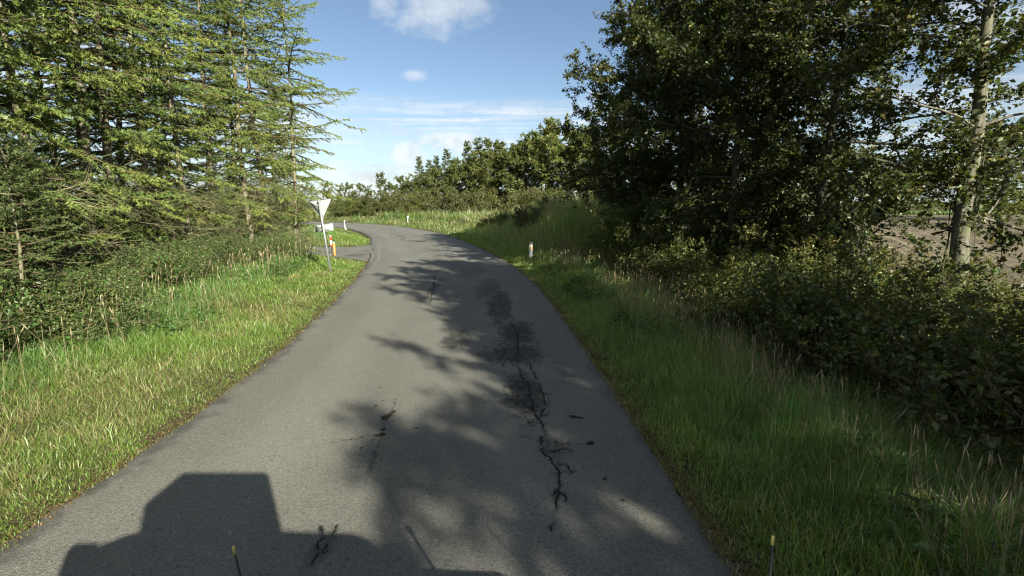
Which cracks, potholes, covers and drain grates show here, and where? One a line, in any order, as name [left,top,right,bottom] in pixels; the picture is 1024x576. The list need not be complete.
crack [480,288,573,539]
crack [311,524,338,565]
